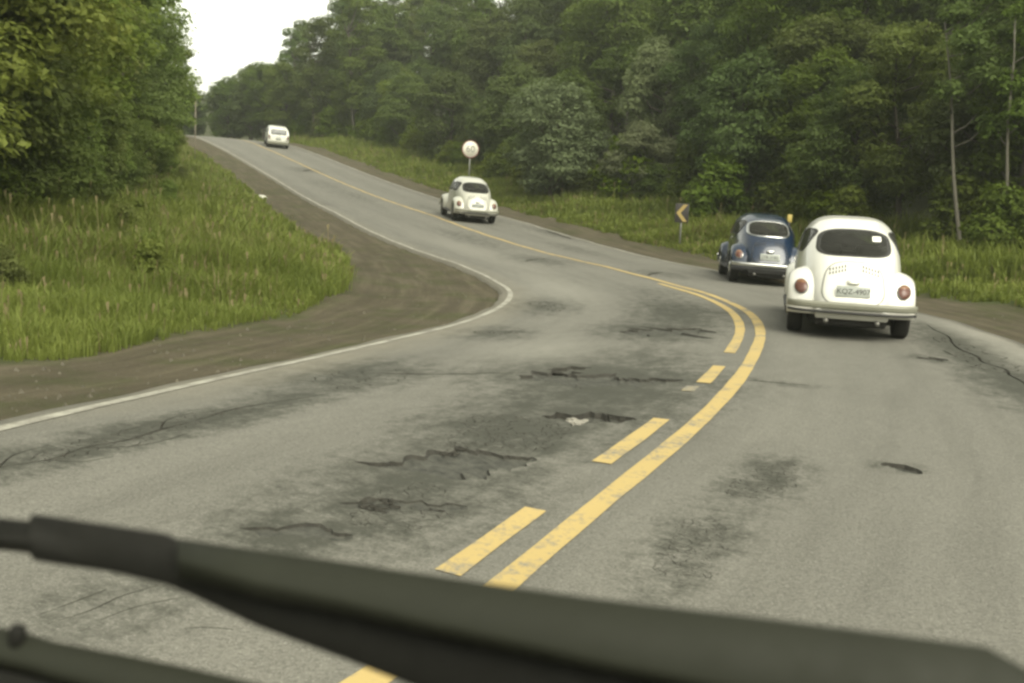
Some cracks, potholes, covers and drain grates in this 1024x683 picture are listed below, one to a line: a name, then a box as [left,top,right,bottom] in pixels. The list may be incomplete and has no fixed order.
pothole [355,446,537,480]
crack [926,324,1024,383]
pothole [340,496,468,514]
pothole [881,462,923,474]
crack [0,395,319,468]
pothole [543,411,637,426]
pothole [519,366,683,388]
